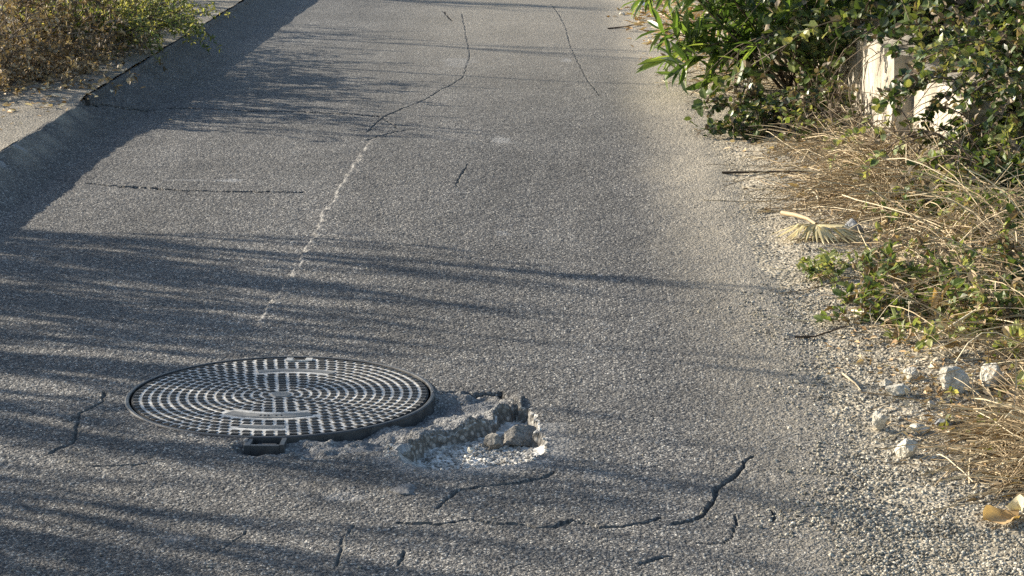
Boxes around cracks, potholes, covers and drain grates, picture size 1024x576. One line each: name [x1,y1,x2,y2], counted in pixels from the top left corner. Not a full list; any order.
crack [396,549,408,566]
manhole cover [125,356,435,456]
crack [39,391,108,458]
crack [641,555,674,565]
crack [335,524,356,567]
pothole [397,403,548,471]
crack [365,11,471,141]
crack [551,4,600,96]
